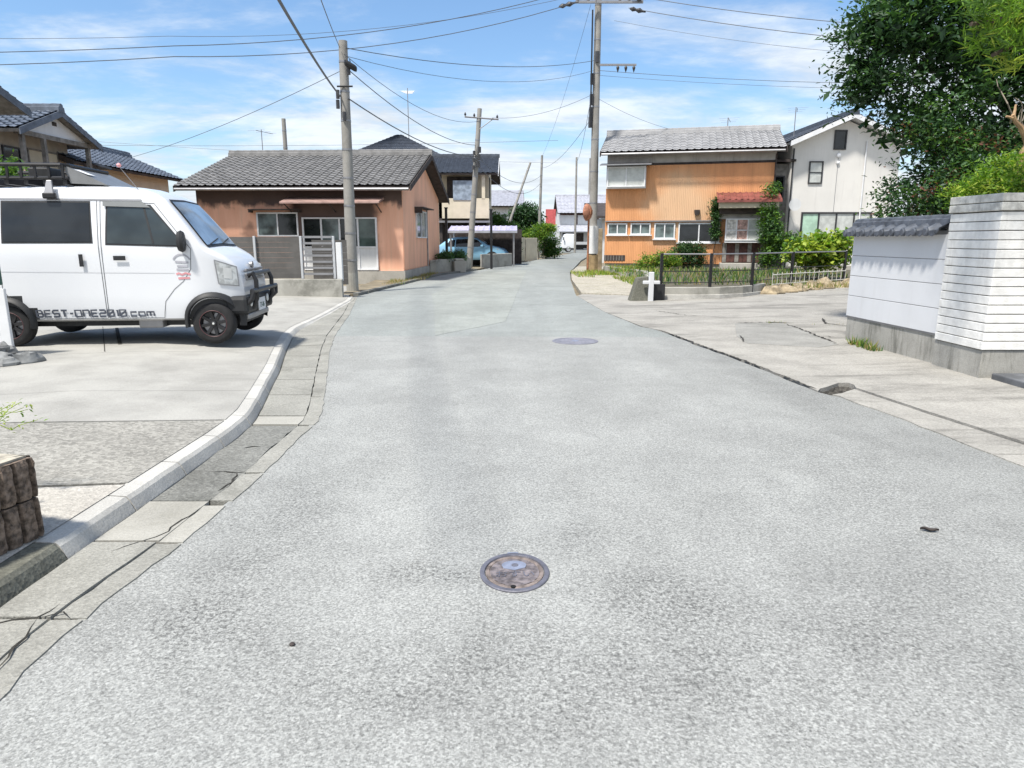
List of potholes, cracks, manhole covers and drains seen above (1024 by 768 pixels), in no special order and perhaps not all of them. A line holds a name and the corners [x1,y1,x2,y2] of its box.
crack [0,605,69,666]
crack [118,509,200,549]
crack [216,471,240,491]
manhole cover [480,552,549,593]
